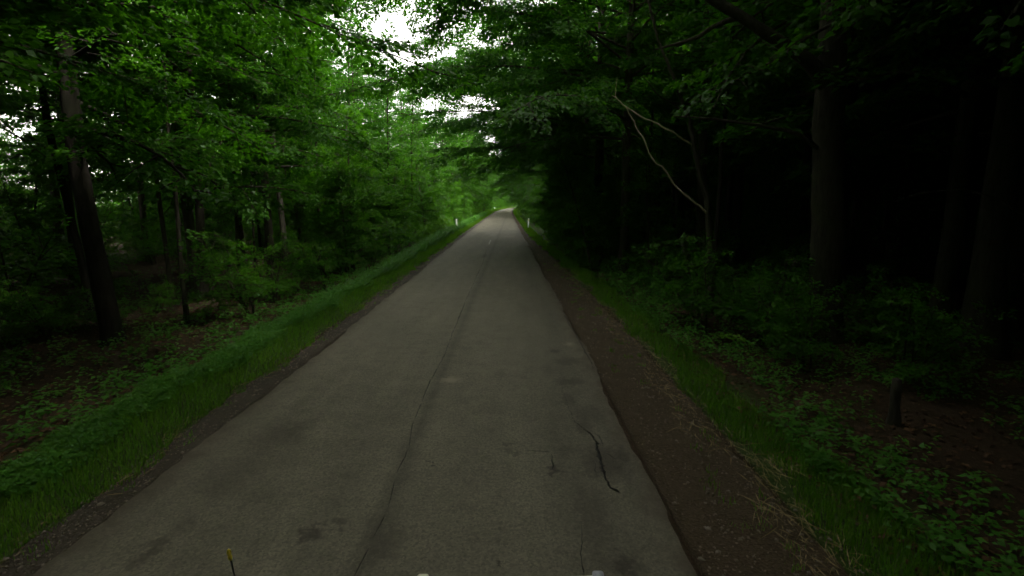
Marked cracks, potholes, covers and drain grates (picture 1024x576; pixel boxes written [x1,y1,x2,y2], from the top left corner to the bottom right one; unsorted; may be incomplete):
crack [560,383,620,493]
